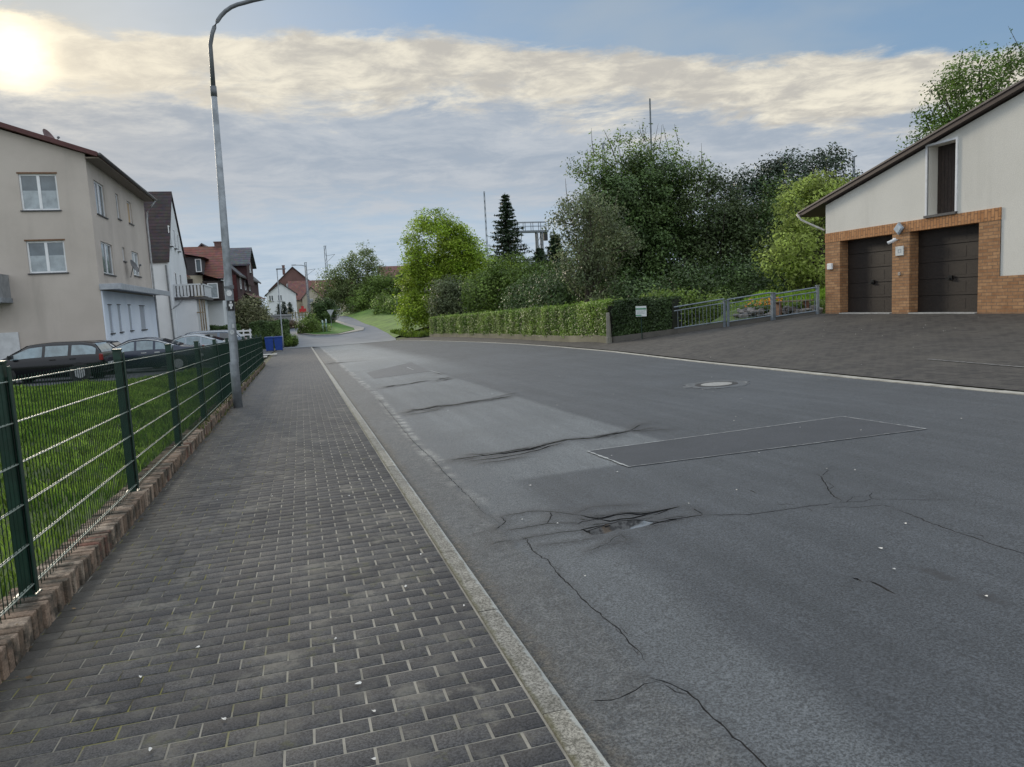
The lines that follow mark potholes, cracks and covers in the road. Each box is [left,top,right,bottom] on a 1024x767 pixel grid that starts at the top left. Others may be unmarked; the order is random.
pothole [590,520,653,538]
crack [465,430,650,462]
crack [498,508,703,547]
crack [525,538,688,701]
manhole cover [683,380,750,389]
crack [410,397,505,412]
crack [726,471,1022,553]
